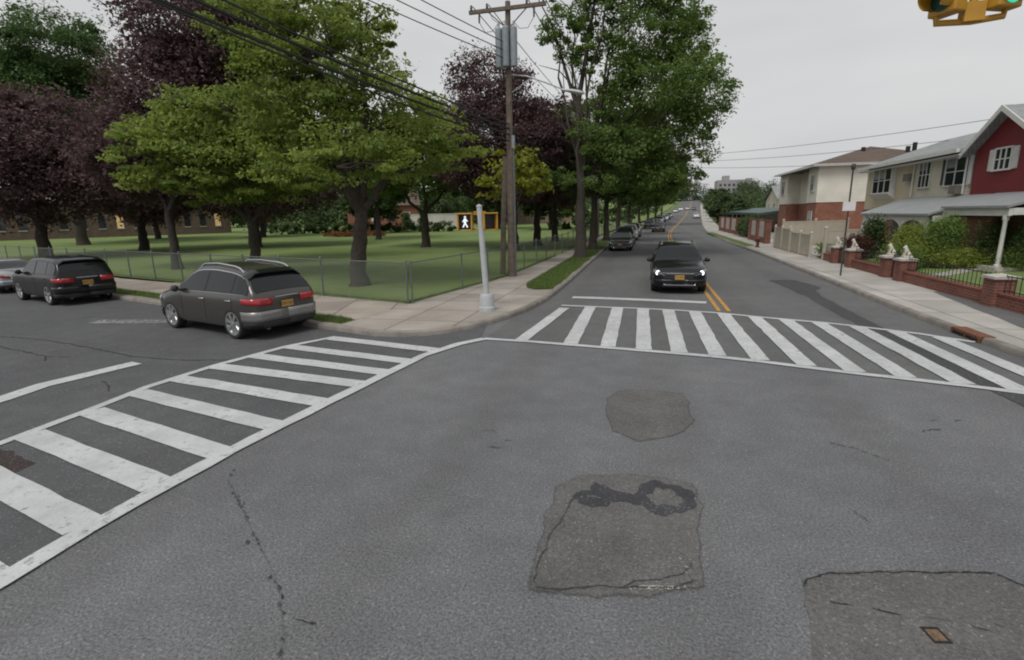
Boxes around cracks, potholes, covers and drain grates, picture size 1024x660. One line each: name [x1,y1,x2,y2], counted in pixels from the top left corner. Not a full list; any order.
crack [228,469,316,656]
manhole cover [920,626,953,644]
crack [0,336,182,361]
drain grate [950,326,997,343]
